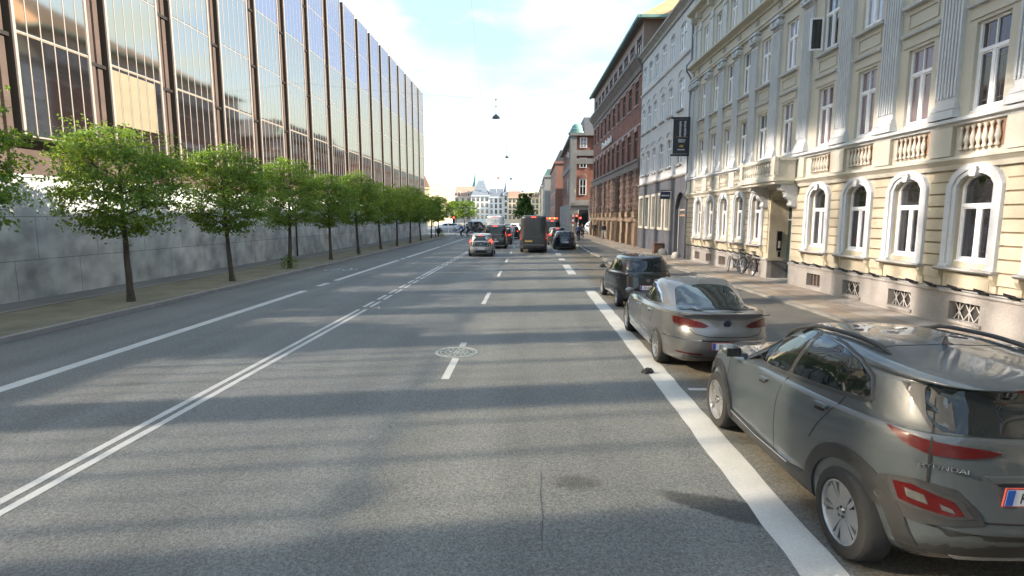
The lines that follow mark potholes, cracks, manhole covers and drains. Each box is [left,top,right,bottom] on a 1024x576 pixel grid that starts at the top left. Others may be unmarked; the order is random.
manhole cover [435,347,479,358]
